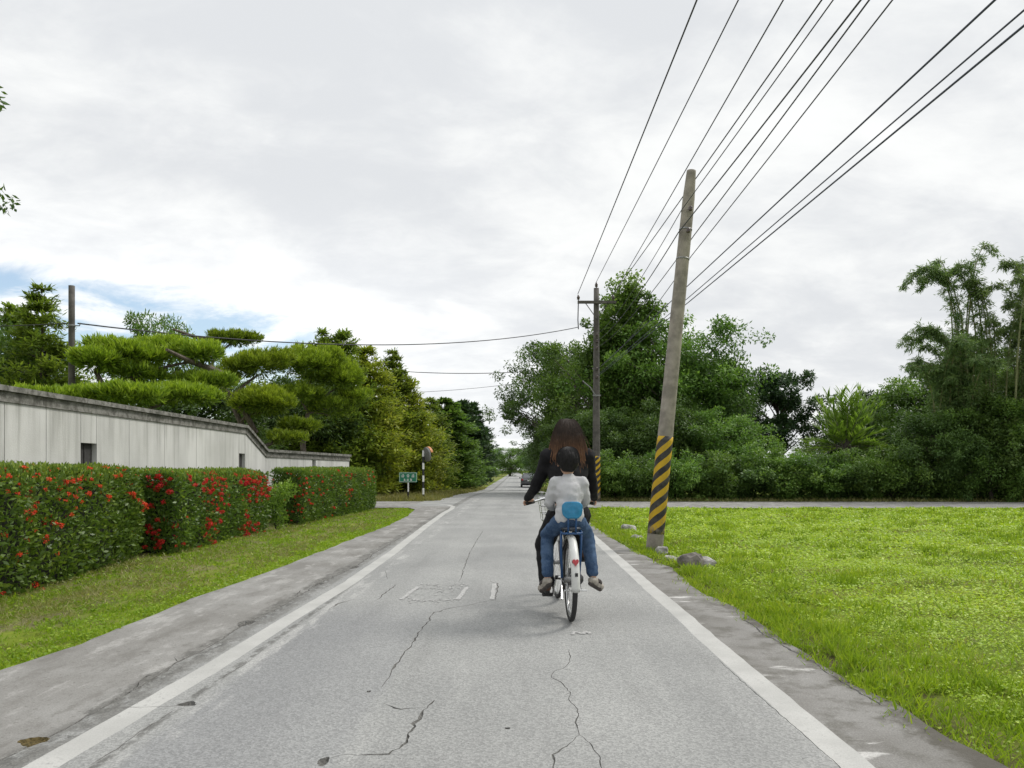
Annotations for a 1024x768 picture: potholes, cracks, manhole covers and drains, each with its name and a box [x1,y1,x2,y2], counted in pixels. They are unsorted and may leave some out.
crack [331,581,499,758]
crack [551,651,602,768]
